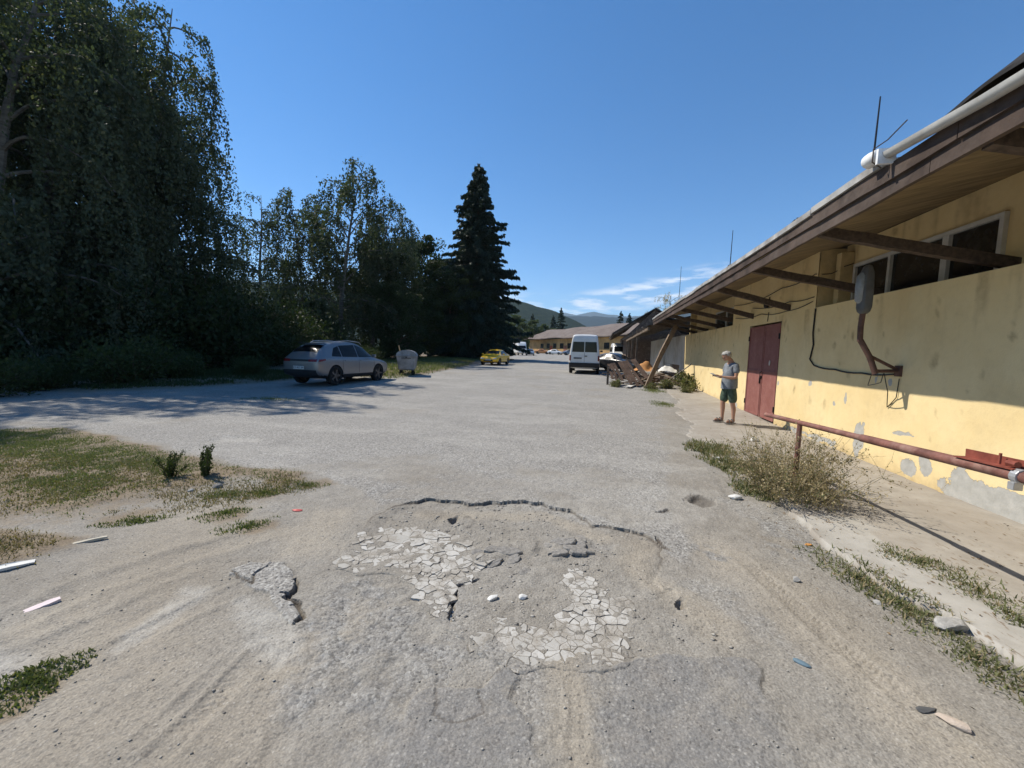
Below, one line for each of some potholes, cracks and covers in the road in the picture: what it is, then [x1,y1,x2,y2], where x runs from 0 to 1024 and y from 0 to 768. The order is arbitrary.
pothole [683,493,718,508]
crack [332,526,635,725]
pothole [333,498,741,676]
crack [550,493,677,513]
